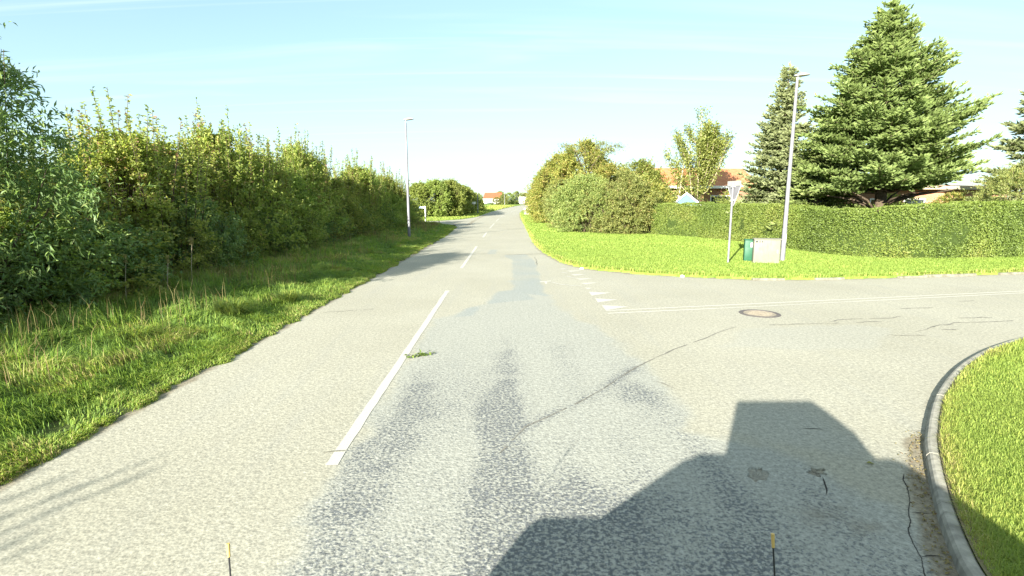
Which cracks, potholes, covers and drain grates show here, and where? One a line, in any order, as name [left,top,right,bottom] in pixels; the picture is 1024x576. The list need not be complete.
crack [903,475,942,576]
manhole cover [739,309,781,318]
crack [901,300,1013,336]
crack [774,308,908,325]
